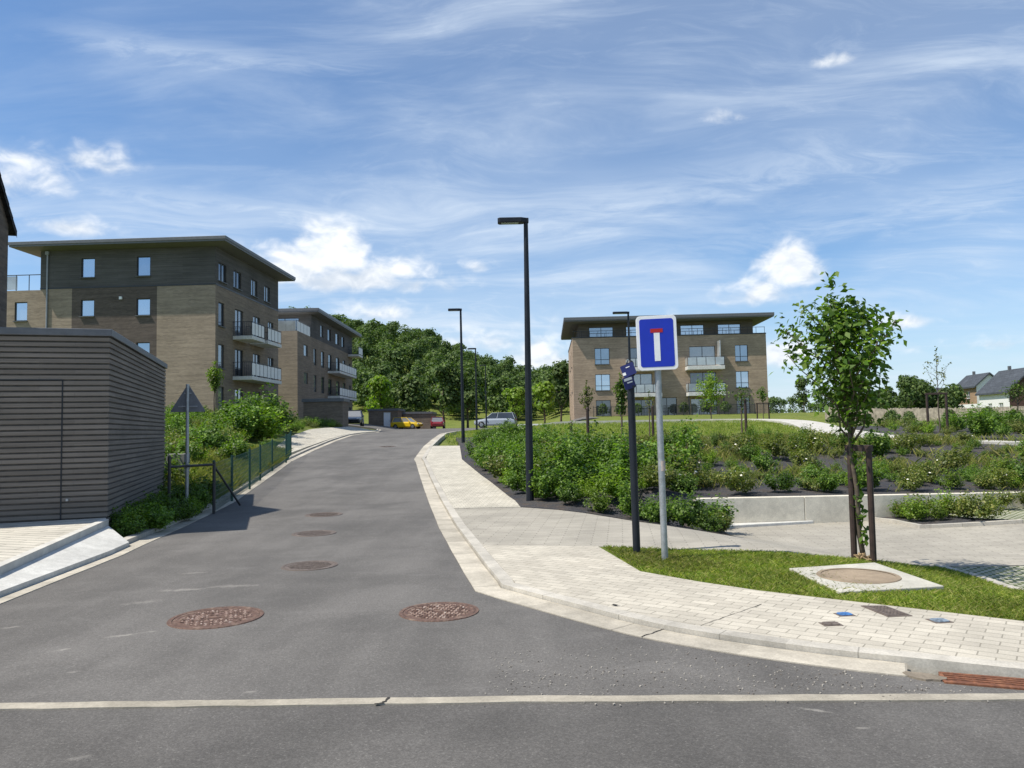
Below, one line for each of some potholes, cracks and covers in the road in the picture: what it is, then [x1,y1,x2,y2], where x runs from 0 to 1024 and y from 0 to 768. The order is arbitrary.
manhole cover [281,560,338,571]
utility cover [861,605,912,617]
manhole cover [789,562,944,594]
drain grate [938,671,1024,690]
manhole cover [399,602,479,622]
manhole cover [167,606,264,630]
